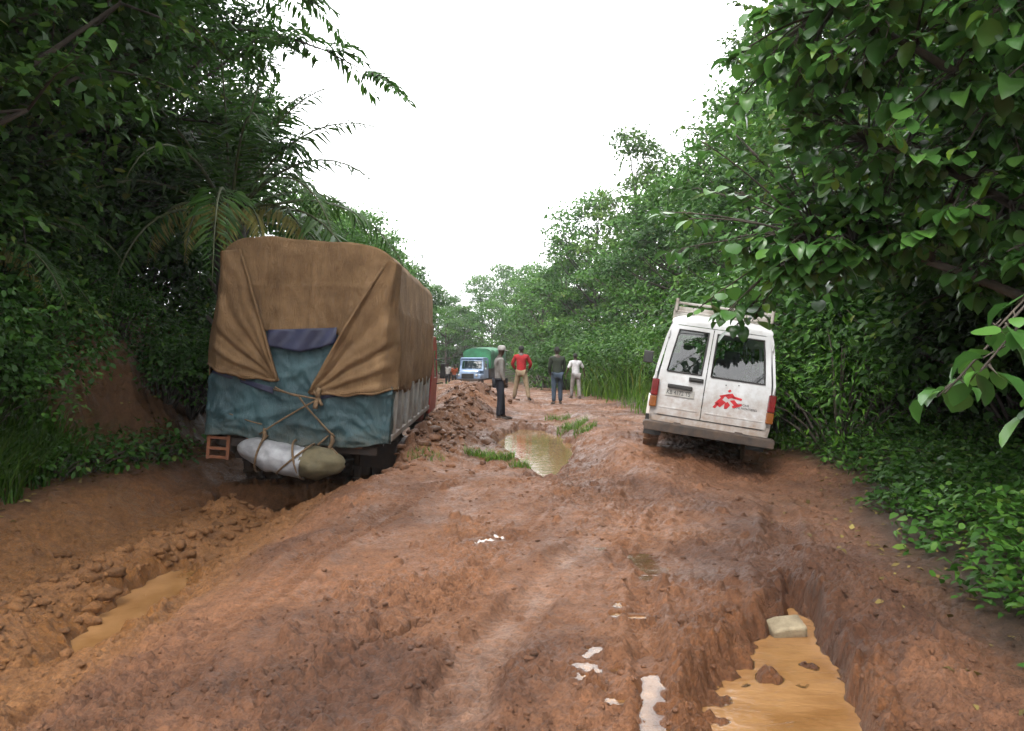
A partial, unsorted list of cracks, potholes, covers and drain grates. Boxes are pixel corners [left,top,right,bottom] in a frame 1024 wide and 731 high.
pothole [27,550,209,664]
pothole [667,563,899,731]
pothole [486,419,587,477]
